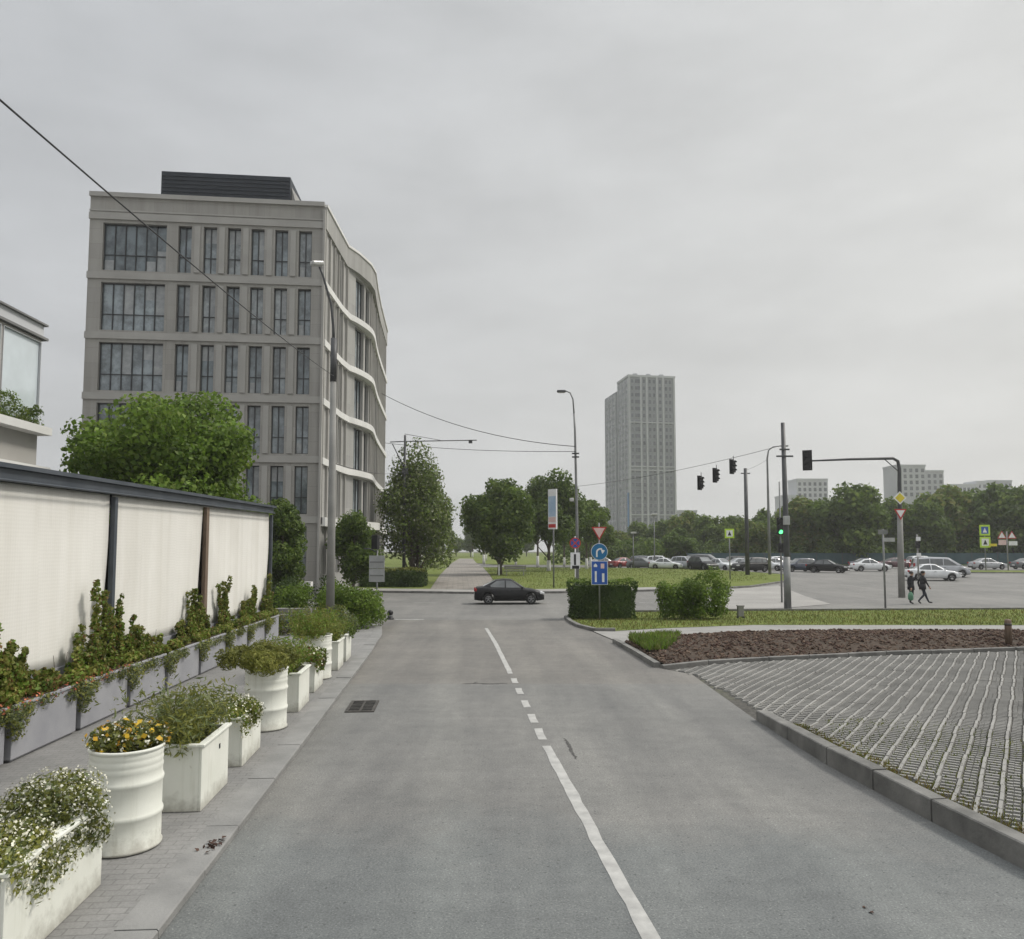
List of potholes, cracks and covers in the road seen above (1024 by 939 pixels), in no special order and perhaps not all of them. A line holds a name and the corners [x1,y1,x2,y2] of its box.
crack [564,738,577,759]
drain grate [344,700,379,713]
